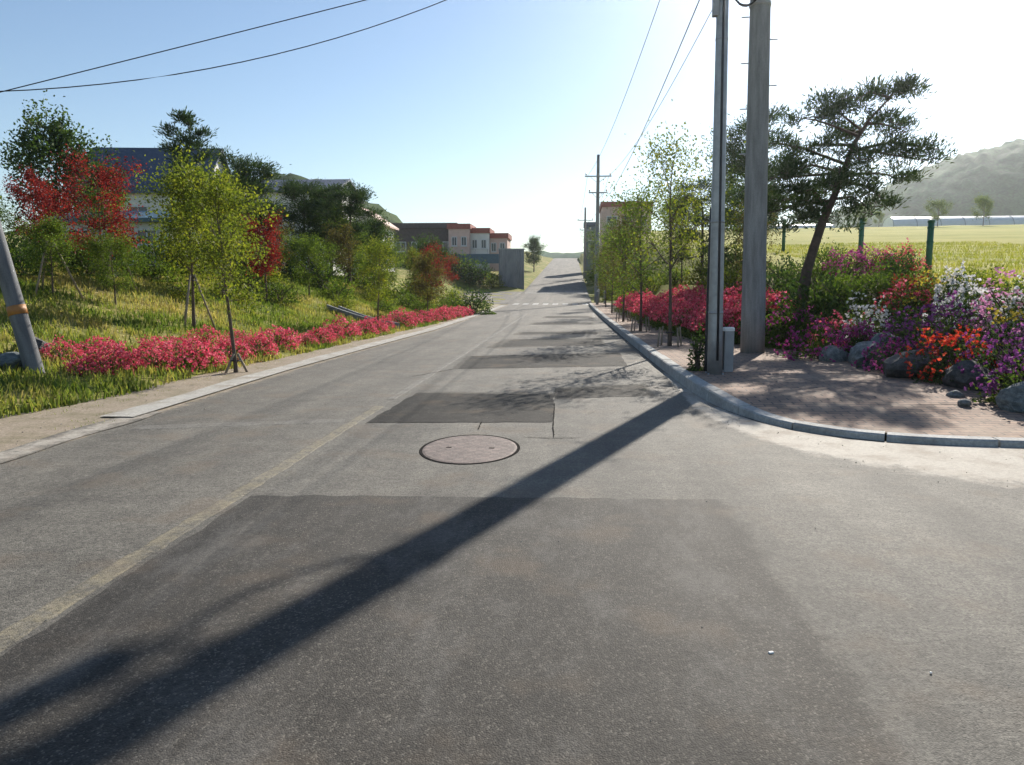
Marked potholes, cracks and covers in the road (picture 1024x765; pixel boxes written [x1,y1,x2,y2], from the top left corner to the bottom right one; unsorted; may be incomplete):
manhole cover [419,435,520,465]
